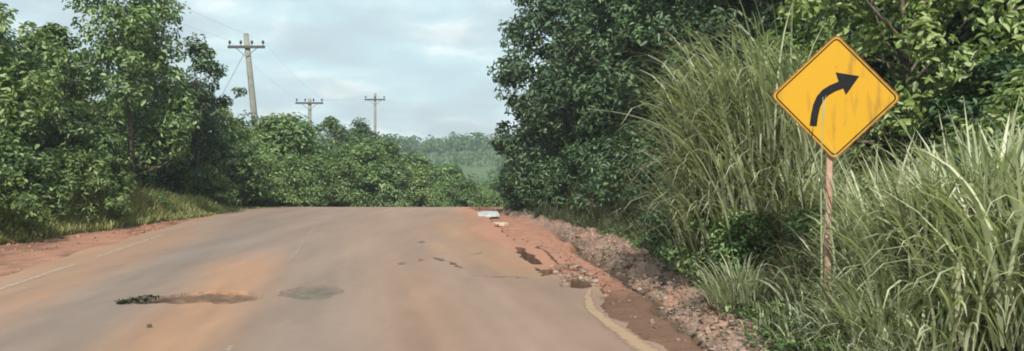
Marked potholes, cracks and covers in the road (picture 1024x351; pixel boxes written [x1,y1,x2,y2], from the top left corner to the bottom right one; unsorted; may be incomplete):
pothole [515,247,542,264]
pothole [571,278,597,289]
pothole [133,291,264,304]
crack [433,253,525,278]
